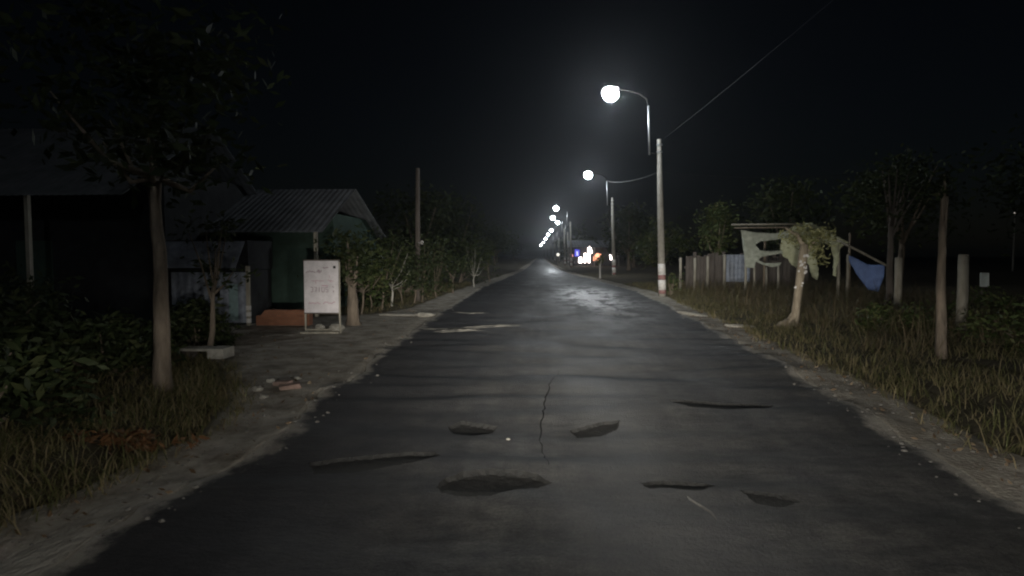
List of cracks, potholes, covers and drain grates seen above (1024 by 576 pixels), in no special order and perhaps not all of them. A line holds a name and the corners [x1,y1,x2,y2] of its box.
pothole [448,421,498,436]
pothole [436,468,553,497]
pothole [740,490,801,507]
crack [539,372,559,465]
pothole [641,481,715,490]
pothole [570,420,620,438]
pothole [669,400,774,409]
pothole [309,452,440,474]
